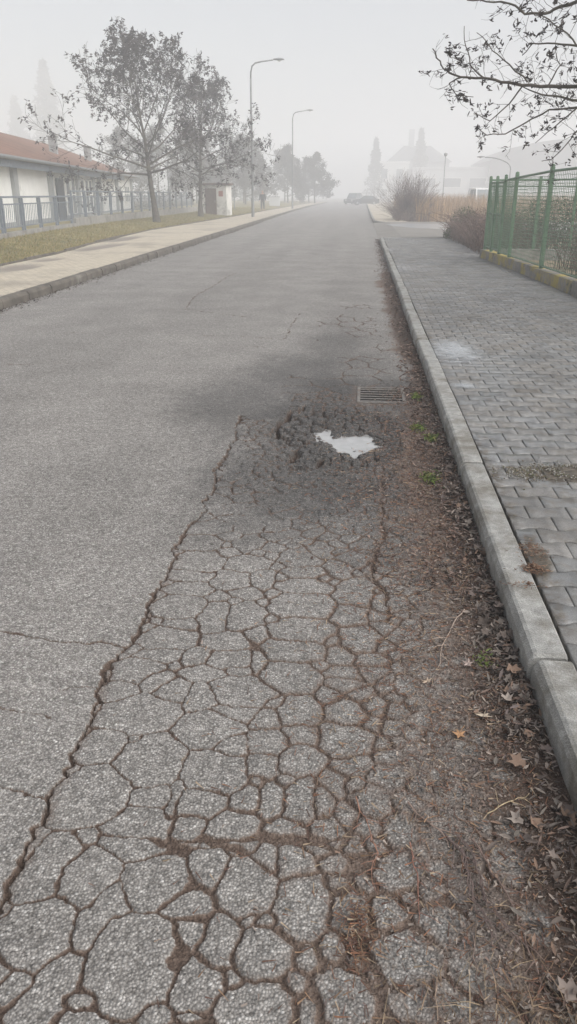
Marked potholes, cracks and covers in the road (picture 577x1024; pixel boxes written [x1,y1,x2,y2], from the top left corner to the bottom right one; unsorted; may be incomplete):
crack [0,304,574,1024]
pothole [269,408,405,472]
crack [170,274,246,317]
drain grate [357,387,406,404]
